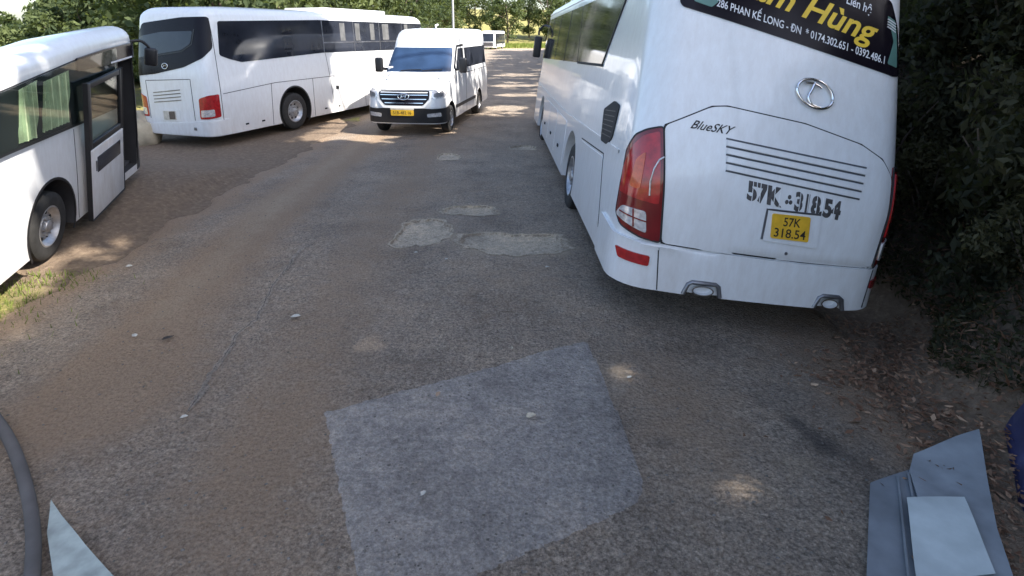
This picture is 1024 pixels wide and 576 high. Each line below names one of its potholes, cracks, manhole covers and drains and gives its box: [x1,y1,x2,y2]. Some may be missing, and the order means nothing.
crack [185,242,316,414]
